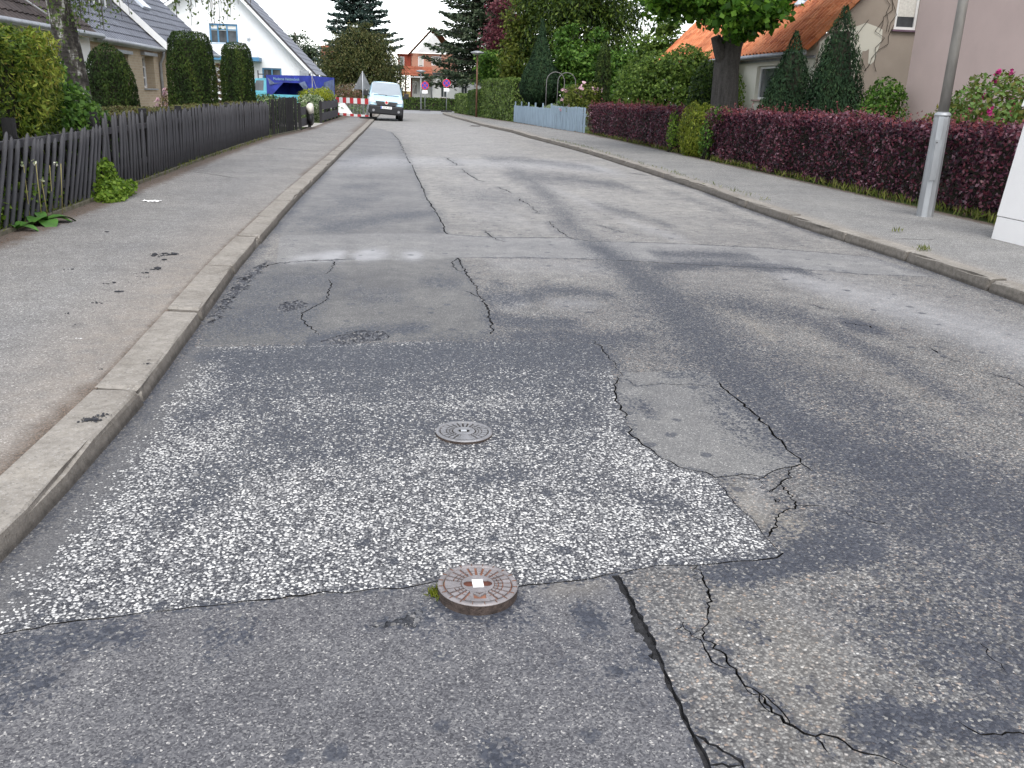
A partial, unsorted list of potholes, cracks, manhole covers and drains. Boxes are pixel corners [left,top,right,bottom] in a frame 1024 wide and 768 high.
crack [592,340,885,537]
pothole [276,300,308,312]
crack [265,259,344,335]
manhole cover [437,564,518,616]
manhole cover [436,421,492,445]
crack [961,723,1024,736]
crack [674,567,907,768]
pothole [321,330,389,345]
